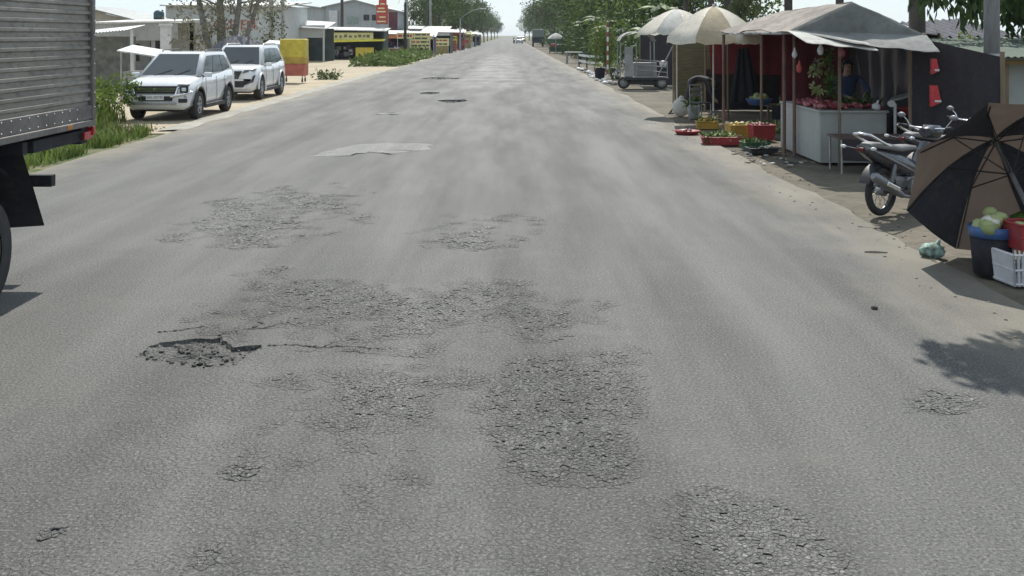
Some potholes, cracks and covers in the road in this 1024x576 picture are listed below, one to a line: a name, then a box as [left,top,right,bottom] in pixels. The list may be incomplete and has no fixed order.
pothole [135,337,262,368]
crack [156,179,861,576]
